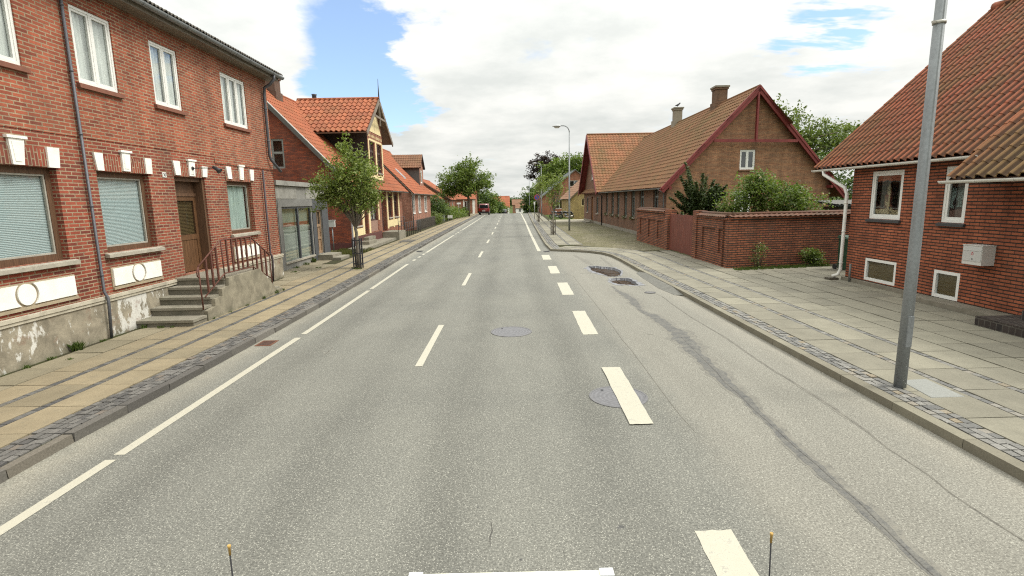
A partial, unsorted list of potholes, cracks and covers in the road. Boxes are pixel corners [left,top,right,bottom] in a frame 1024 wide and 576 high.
pothole [584,266,623,277]
manhole cover [491,326,532,337]
pothole [608,278,644,286]
manhole cover [589,386,648,408]
